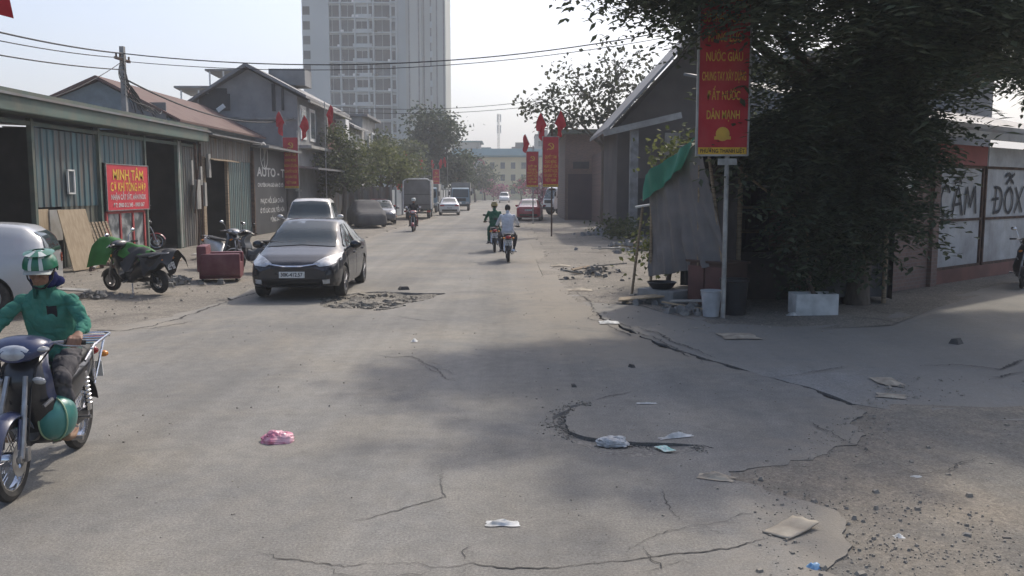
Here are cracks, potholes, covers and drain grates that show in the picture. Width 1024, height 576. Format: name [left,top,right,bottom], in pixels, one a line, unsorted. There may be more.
crack [266,489,764,576]
crack [381,355,453,380]
pothole [319,291,445,311]
crack [349,470,446,522]
crack [920,359,1024,377]
